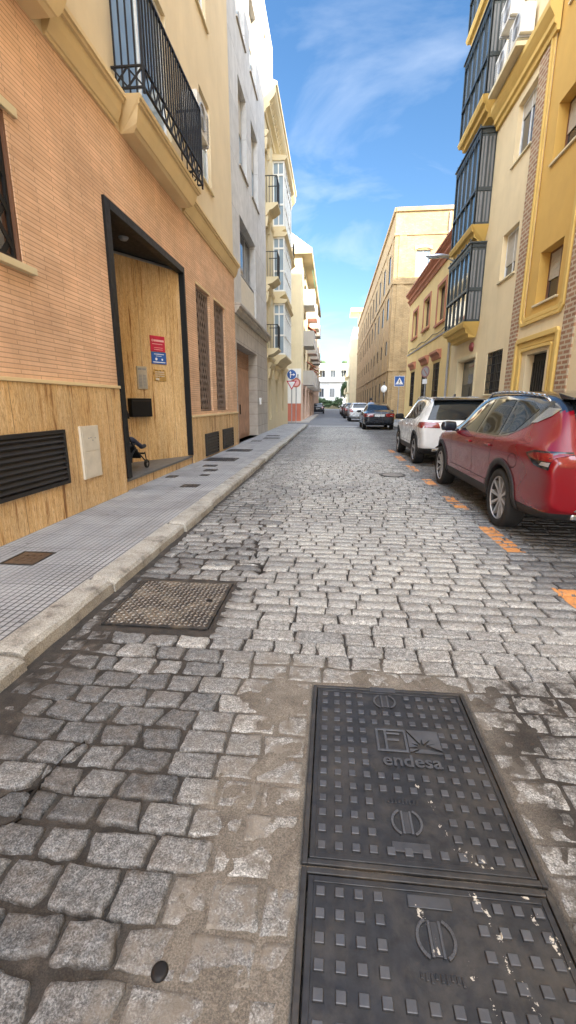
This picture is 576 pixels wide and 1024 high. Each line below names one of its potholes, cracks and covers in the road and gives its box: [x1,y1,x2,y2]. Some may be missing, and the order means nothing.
manhole cover [291,866,576,1024]
manhole cover [302,685,548,890]
utility cover [0,551,57,566]
manhole cover [101,580,233,631]
